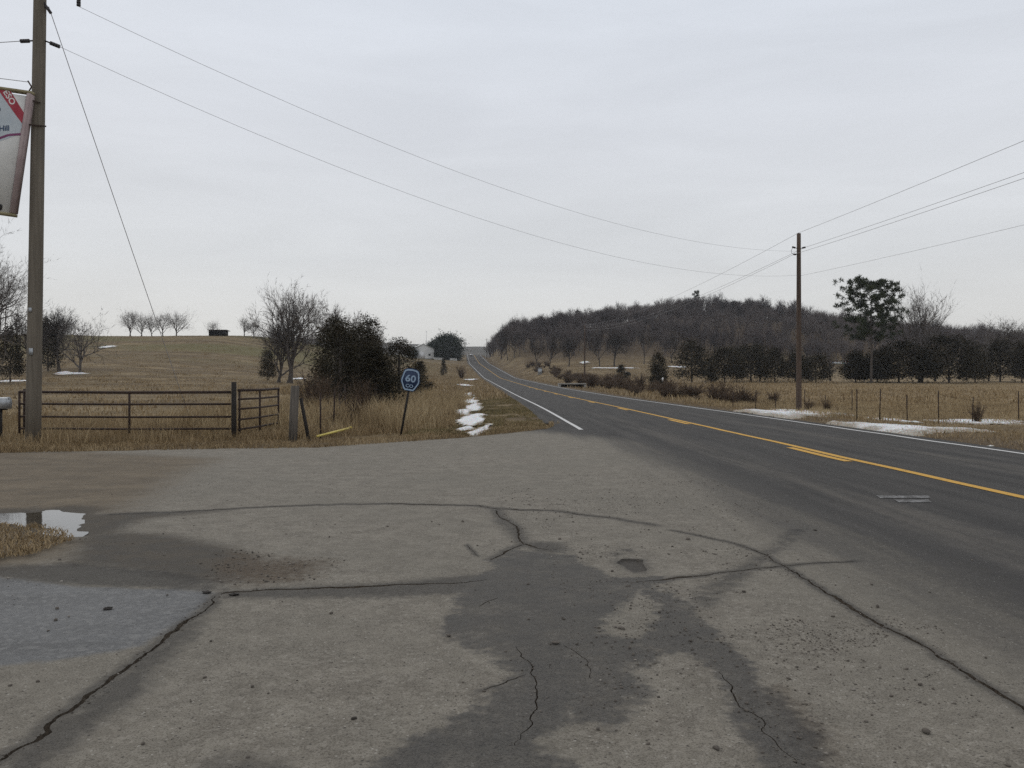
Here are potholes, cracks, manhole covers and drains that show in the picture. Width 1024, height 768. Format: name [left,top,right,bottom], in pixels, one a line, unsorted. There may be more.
crack [131,503,652,560]
crack [485,649,538,745]
crack [719,672,797,764]
crack [0,580,481,761]
pothole [617,559,647,573]
crack [631,533,1024,710]
